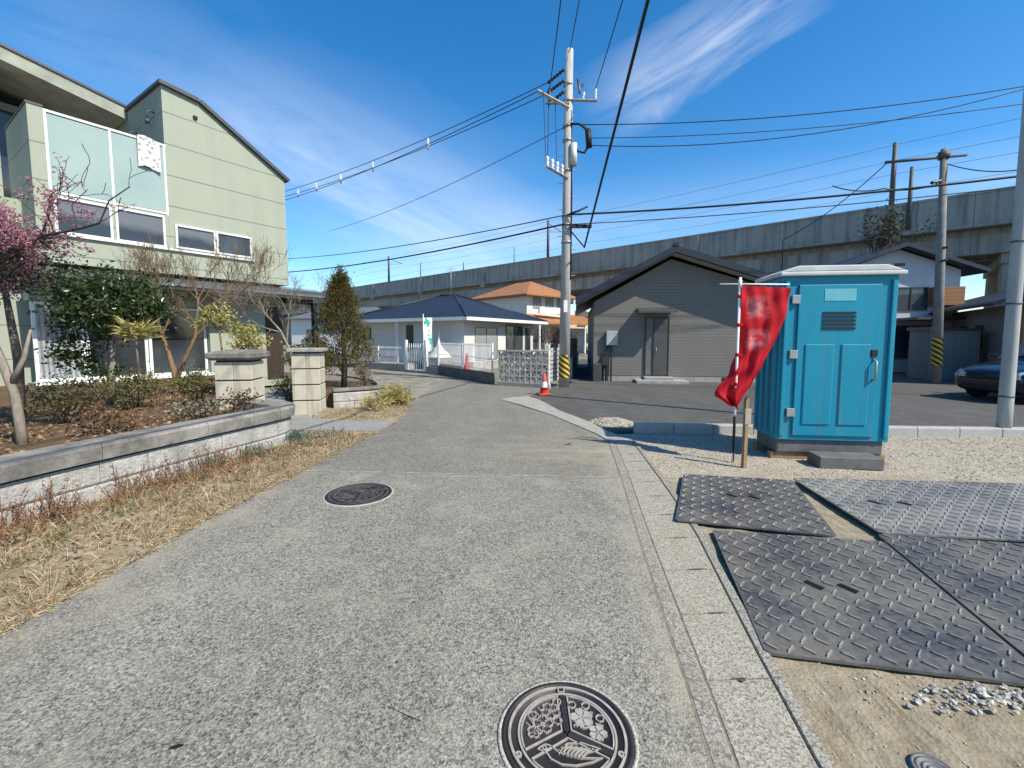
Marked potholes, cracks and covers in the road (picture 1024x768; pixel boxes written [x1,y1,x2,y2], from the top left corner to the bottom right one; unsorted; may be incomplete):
manhole cover [322,483,394,507]
manhole cover [498,680,639,768]
utility cover [909,752,952,768]
